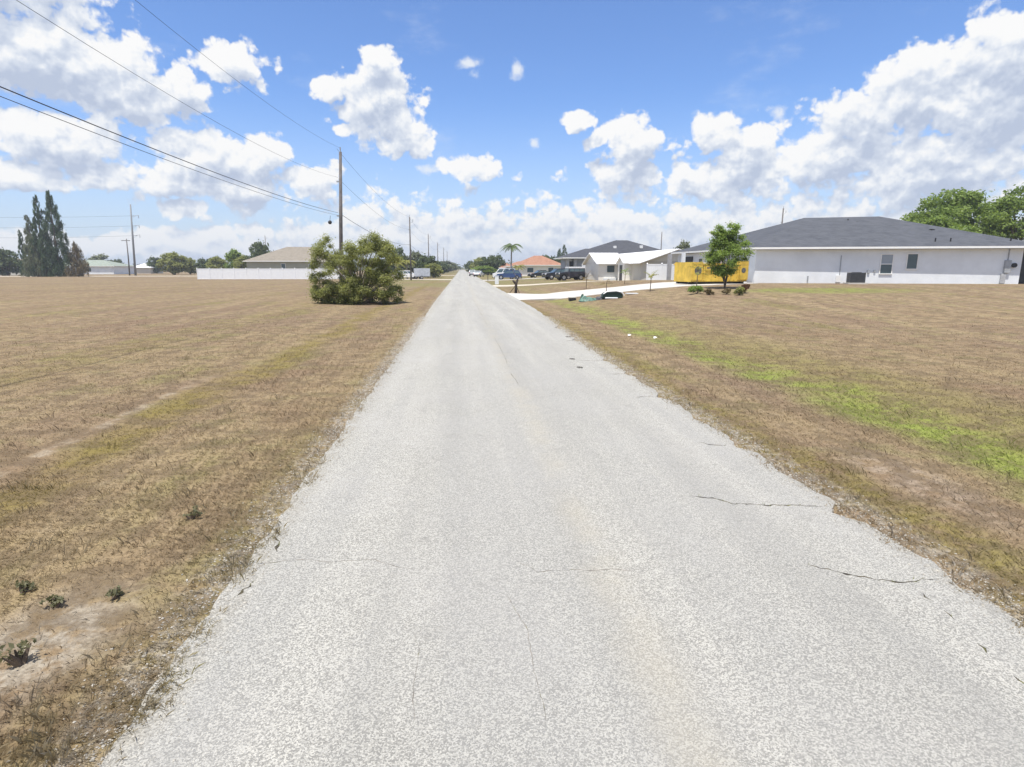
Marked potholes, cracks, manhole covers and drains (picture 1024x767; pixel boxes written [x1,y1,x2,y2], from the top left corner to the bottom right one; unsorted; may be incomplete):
crack [805,564,1024,683]
crack [513,560,645,572]
crack [697,495,822,507]
crack [238,526,416,595]
crack [508,597,546,718]
